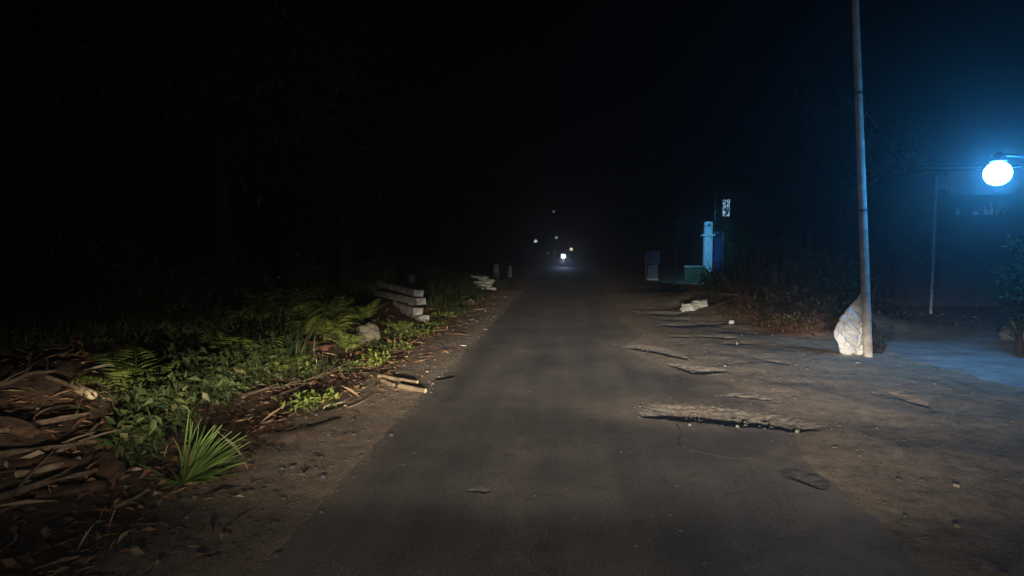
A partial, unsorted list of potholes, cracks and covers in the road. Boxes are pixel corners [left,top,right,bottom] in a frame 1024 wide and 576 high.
pothole [634,403,828,433]
pothole [462,486,492,494]
pothole [724,393,773,401]
pothole [622,344,691,361]
pothole [880,389,932,410]
pothole [777,468,831,491]
crack [676,424,747,459]
pothole [662,361,730,375]
